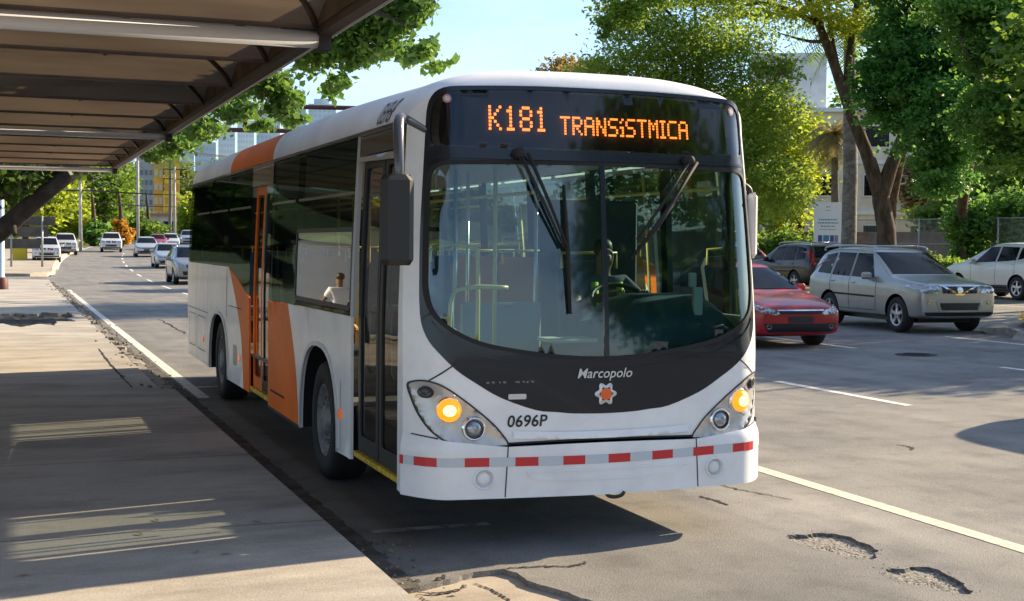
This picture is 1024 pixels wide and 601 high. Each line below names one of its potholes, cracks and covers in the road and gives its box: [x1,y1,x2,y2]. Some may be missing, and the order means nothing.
crack [99,349,133,388]
pothole [873,565,982,597]
crack [416,561,587,601]
pothole [779,530,889,565]
crack [700,485,792,505]
